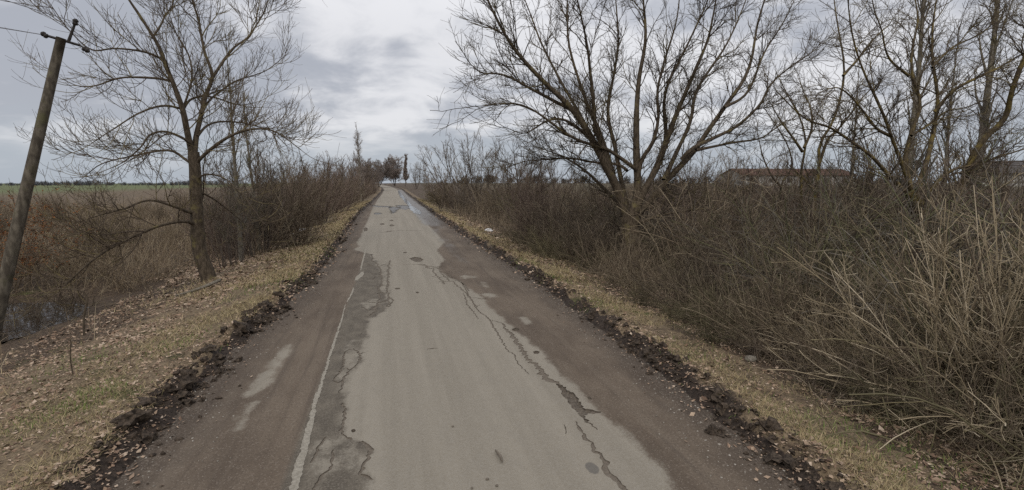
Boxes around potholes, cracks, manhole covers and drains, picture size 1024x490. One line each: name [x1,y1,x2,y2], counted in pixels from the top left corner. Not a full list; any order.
crack [362,254,628,490]
crack [310,349,374,490]
